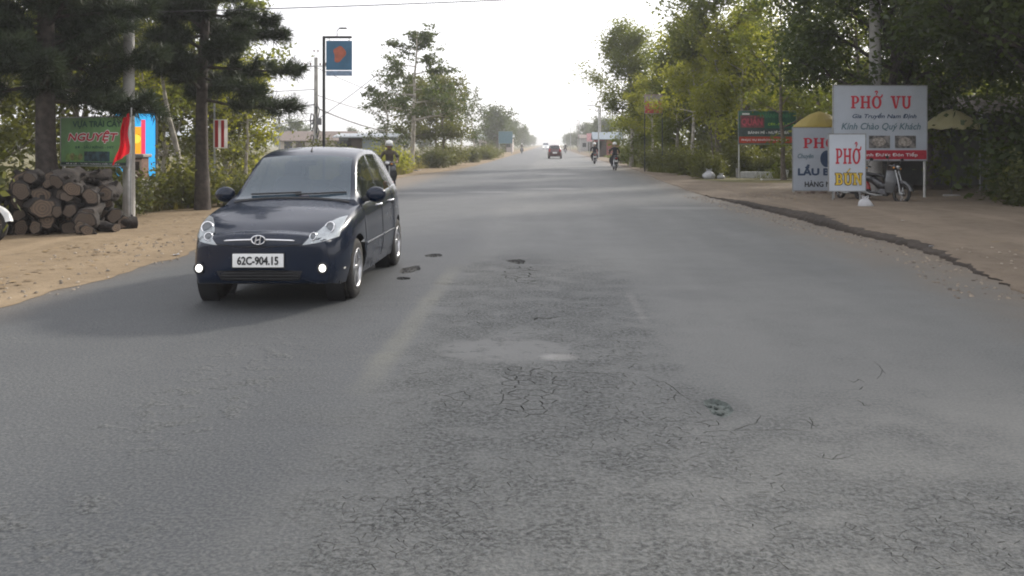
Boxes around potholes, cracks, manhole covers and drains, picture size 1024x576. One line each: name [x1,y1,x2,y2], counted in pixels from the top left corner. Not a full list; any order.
pothole [399,266,421,274]
crack [845,493,1024,571]
pothole [703,399,734,418]
crack [311,297,818,570]
